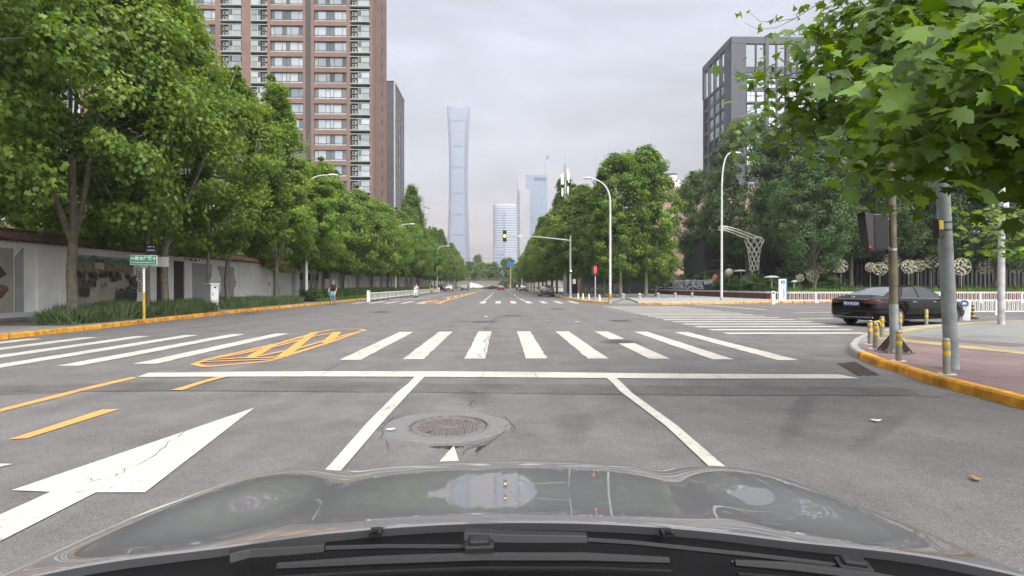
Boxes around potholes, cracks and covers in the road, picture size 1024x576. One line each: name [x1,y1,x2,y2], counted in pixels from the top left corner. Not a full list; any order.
crack [380,402,539,456]
drain grate [836,362,881,376]
manhole cover [383,412,512,443]
